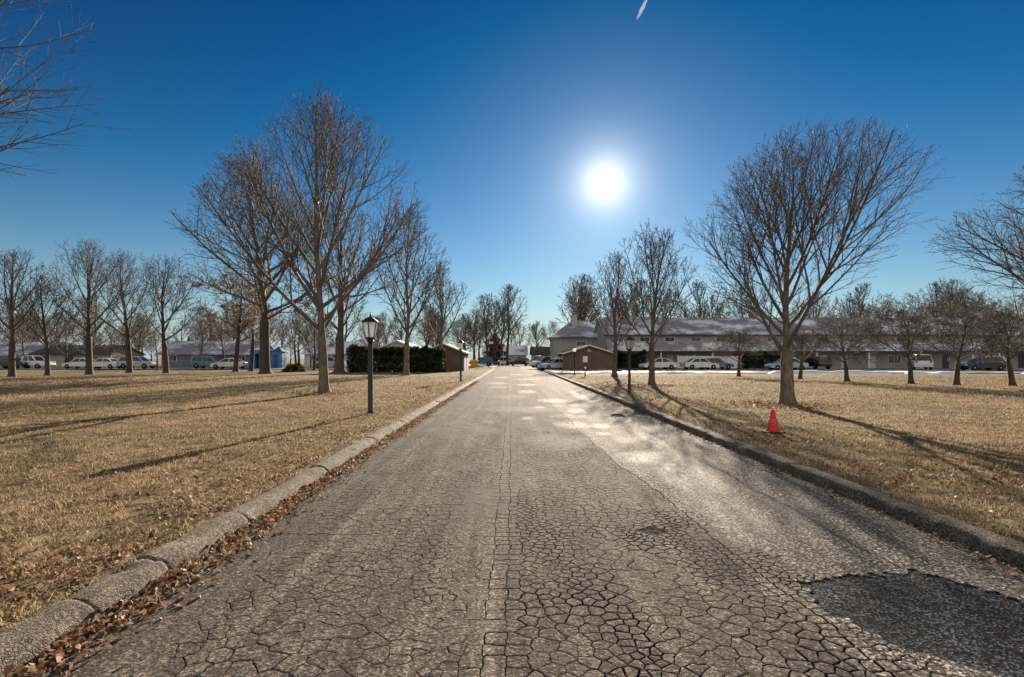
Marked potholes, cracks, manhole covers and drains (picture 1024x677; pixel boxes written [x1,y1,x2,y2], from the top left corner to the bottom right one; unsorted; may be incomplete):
pothole [636,526,669,536]
crack [173,411,968,677]
